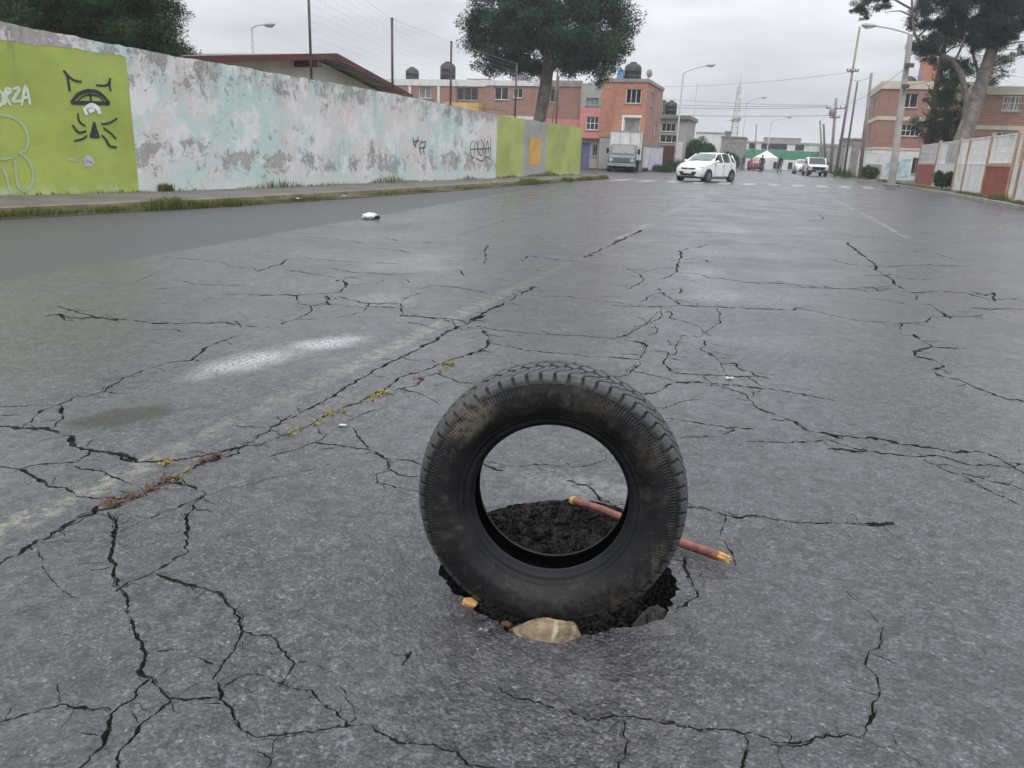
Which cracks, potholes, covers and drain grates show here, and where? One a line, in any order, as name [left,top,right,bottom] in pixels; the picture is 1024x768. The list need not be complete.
pothole [439,499,680,635]
crack [0,215,1024,768]
